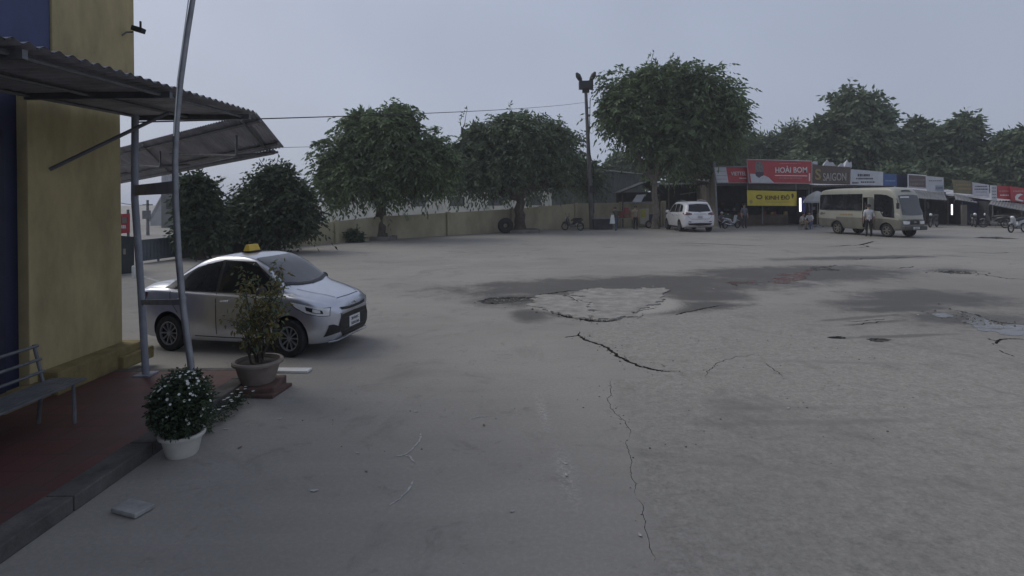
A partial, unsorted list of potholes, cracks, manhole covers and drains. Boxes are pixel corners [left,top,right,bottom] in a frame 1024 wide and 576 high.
crack [538,291,720,554]
crack [956,310,1024,356]
